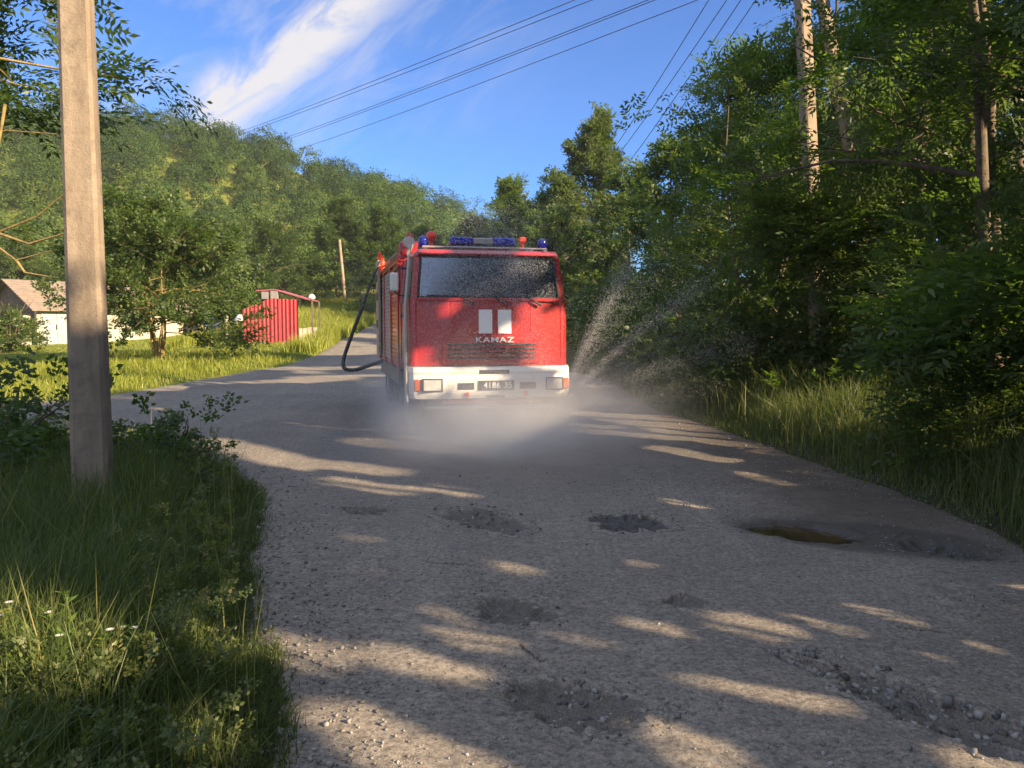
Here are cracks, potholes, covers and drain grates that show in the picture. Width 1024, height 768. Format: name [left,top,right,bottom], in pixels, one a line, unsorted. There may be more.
crack [520,643,542,663]
pothole [763,645,1024,768]
pothole [329,504,398,517]
pothole [880,535,1022,565]
pothole [423,503,544,539]
pothole [648,589,723,613]
pothole [719,518,888,548]
pothole [462,667,678,745]
pothole [454,589,577,631]
pothole [571,510,683,536]
